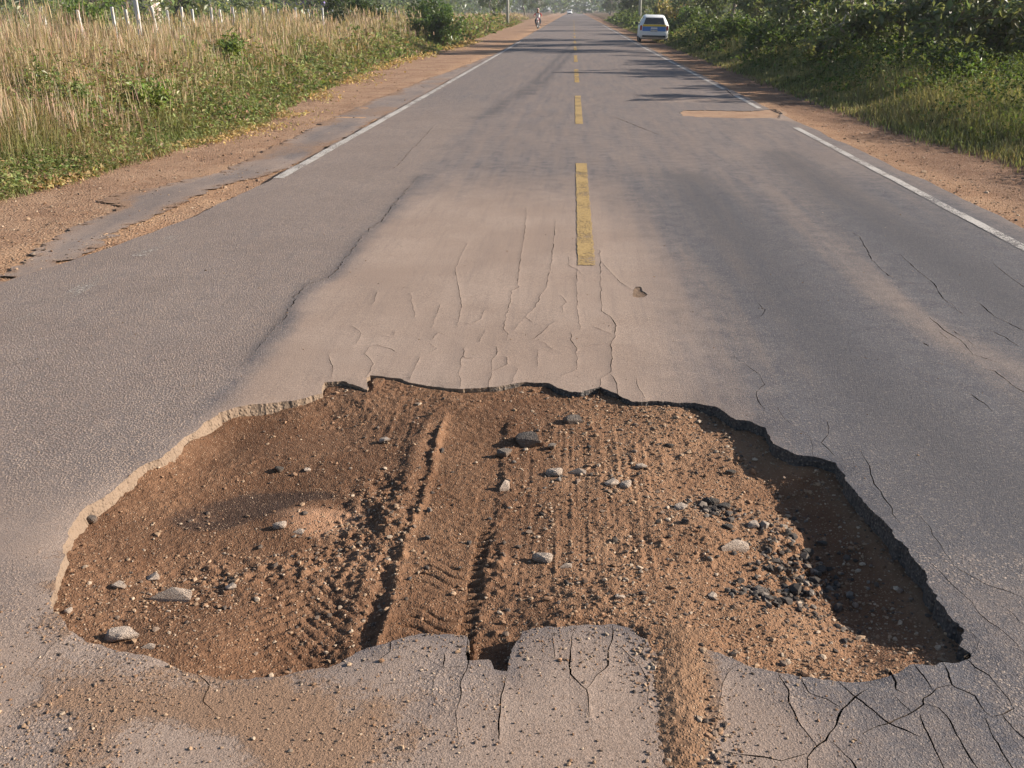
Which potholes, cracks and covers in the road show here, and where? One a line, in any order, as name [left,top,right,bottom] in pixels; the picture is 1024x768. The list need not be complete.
crack [424,640,470,740]
crack [852,232,971,352]
crack [598,253,644,400]
pothole [627,286,647,298]
crack [532,230,581,370]
pothole [50,375,977,755]
crack [552,629,648,714]
crack [716,525,1024,768]
crack [458,213,527,387]
